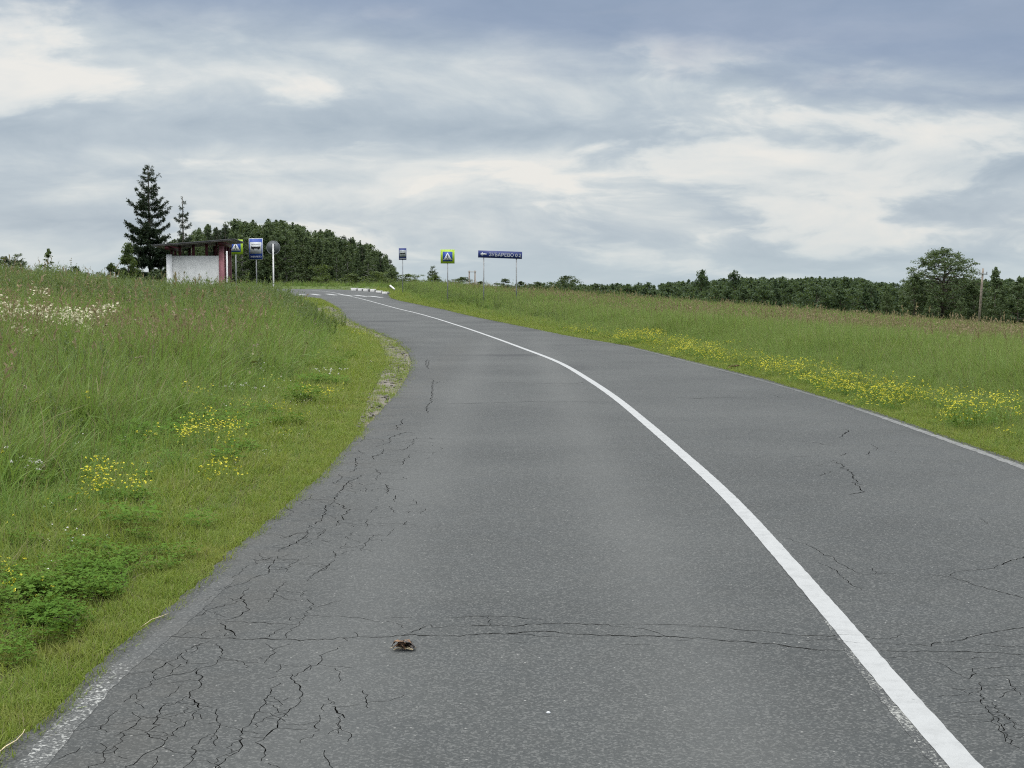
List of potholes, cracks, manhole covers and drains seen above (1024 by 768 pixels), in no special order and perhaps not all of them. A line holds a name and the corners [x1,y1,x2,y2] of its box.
crack [813,430,864,494]
crack [173,419,837,650]
crack [59,613,404,768]
crack [792,540,893,590]
crack [865,627,1024,746]
